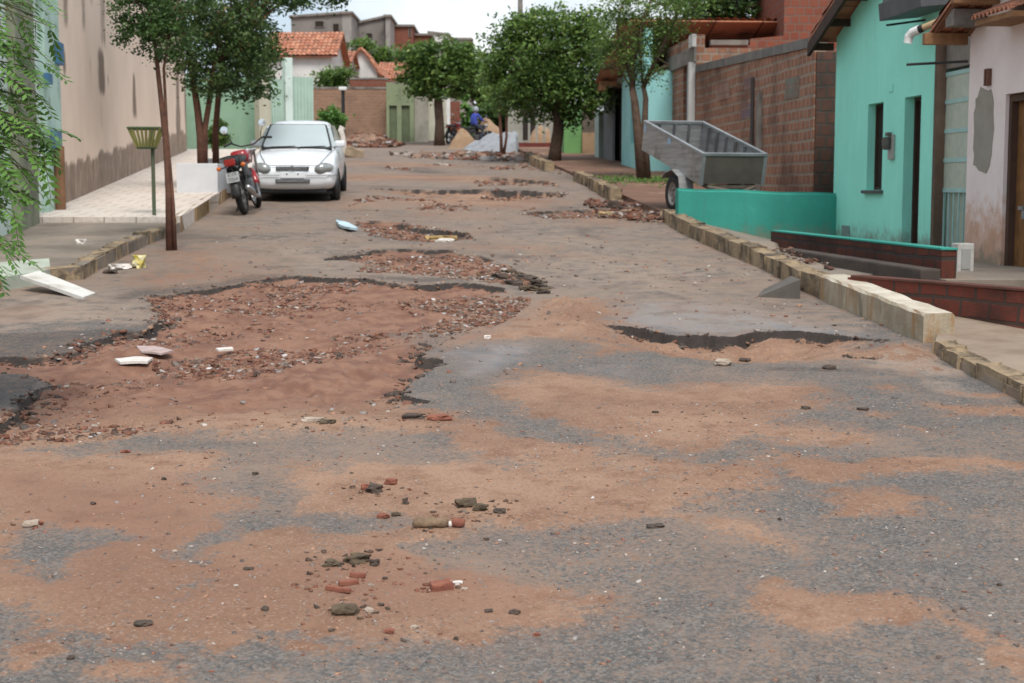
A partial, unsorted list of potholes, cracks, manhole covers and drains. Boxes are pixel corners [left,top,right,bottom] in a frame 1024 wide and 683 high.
pothole [0,275,535,451]
pothole [508,209,612,219]
pothole [346,186,568,203]
pothole [323,249,557,290]
pothole [354,221,475,243]
pothole [576,323,899,365]
